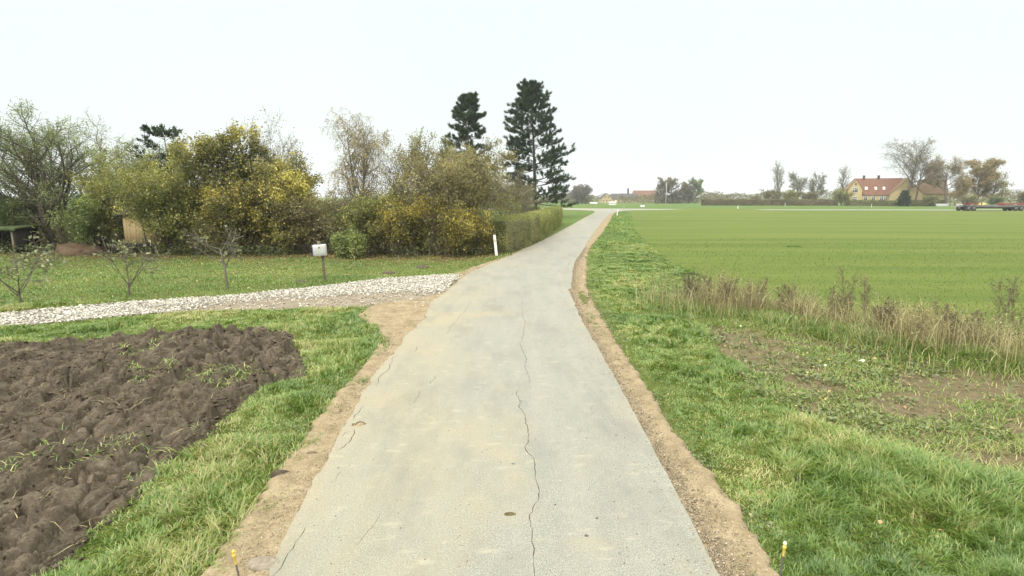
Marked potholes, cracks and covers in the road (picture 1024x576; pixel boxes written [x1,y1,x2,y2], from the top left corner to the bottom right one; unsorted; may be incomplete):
crack [516,299,540,576]
